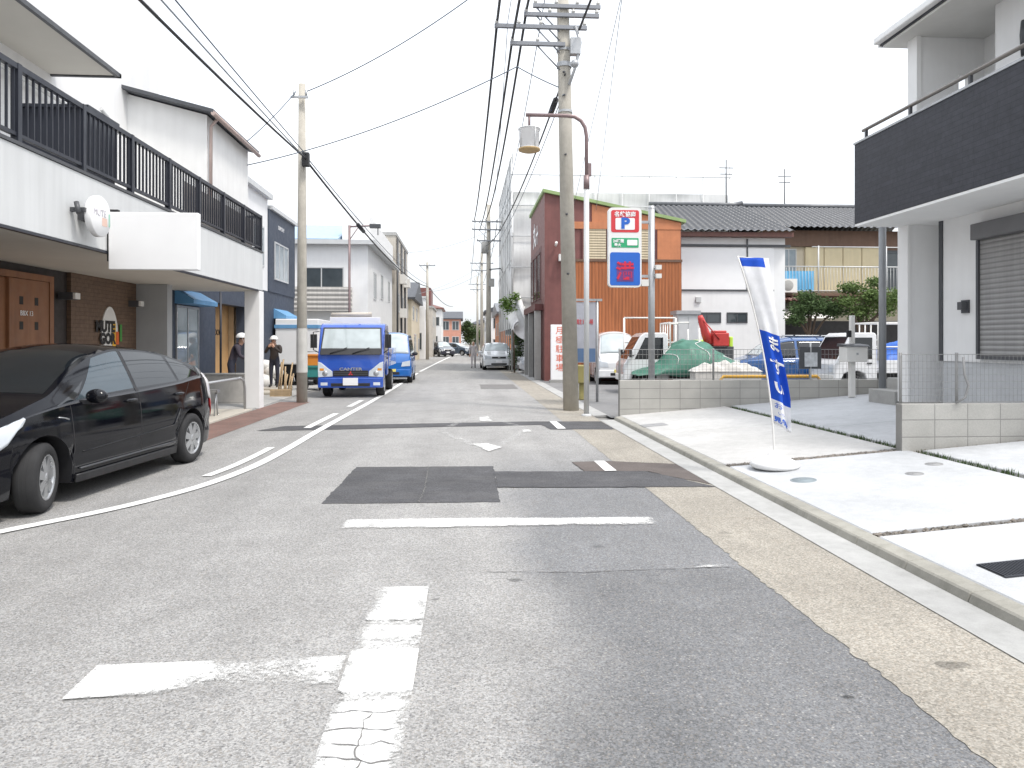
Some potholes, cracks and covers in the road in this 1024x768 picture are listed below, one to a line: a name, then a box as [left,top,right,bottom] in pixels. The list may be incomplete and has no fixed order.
drain grate [976,559,1024,578]
crack [317,710,399,768]
